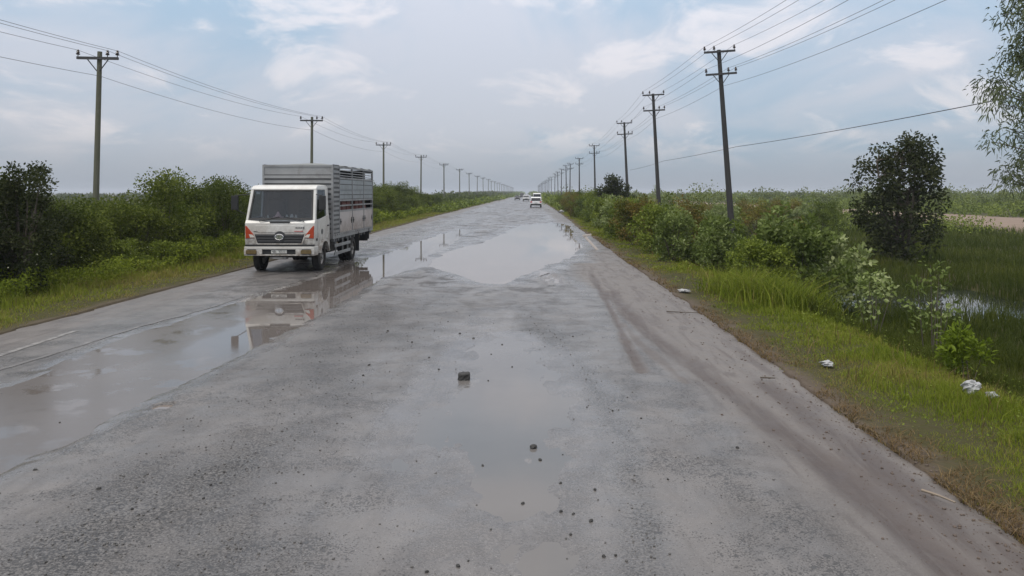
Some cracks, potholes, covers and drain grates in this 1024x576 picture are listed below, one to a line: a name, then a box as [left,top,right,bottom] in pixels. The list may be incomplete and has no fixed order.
pothole [429,223,583,284]
